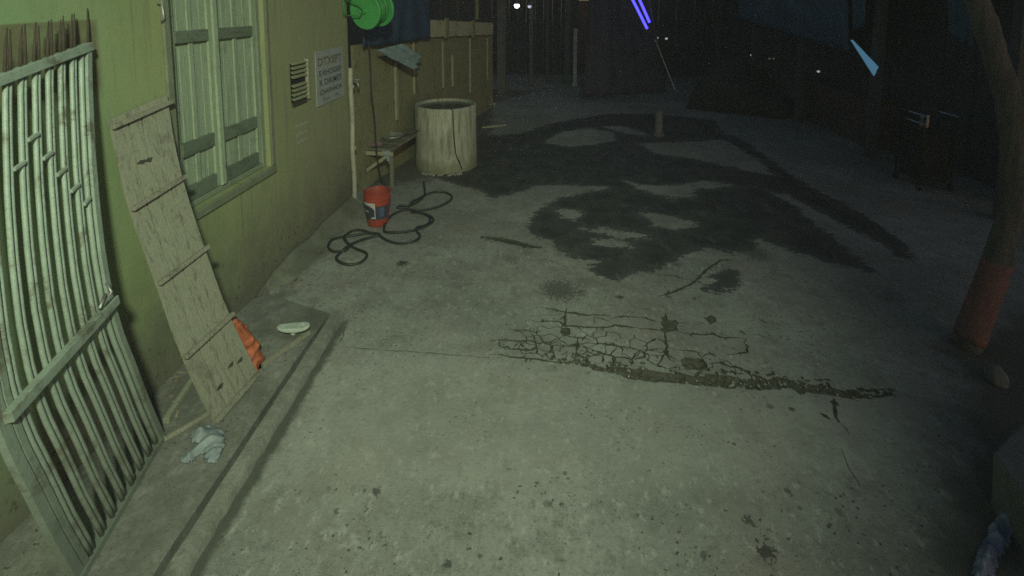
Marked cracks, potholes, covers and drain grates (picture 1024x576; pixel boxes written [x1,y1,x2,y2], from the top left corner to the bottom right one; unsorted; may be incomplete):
crack [820,398,859,486]
crack [657,259,729,297]
crack [489,307,767,380]
pothole [681,358,708,371]
